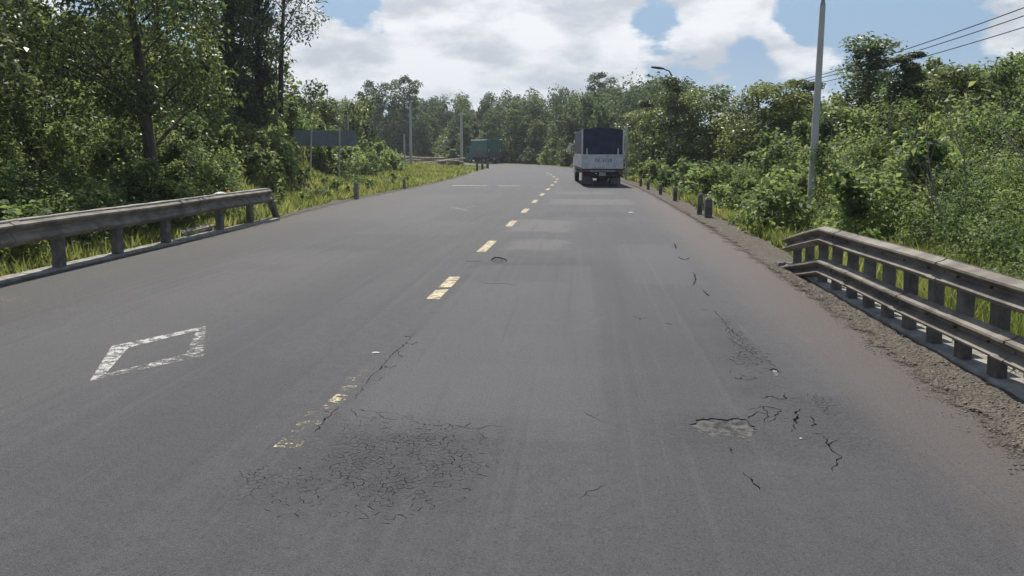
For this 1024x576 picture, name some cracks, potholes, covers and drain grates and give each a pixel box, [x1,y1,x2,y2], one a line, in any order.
crack [234,465,281,500]
pothole [690,418,756,439]
crack [674,243,842,471]
crack [356,332,417,397]
